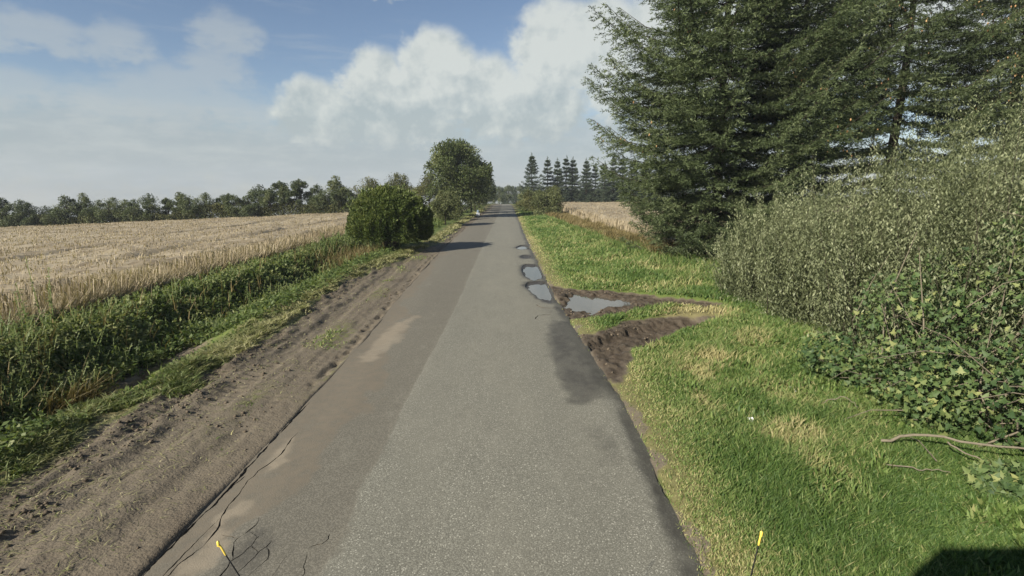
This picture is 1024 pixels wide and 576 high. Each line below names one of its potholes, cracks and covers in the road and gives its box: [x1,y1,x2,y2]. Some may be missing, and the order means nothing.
pothole [521,264,543,281]
crack [143,402,329,576]
pothole [525,281,553,303]
